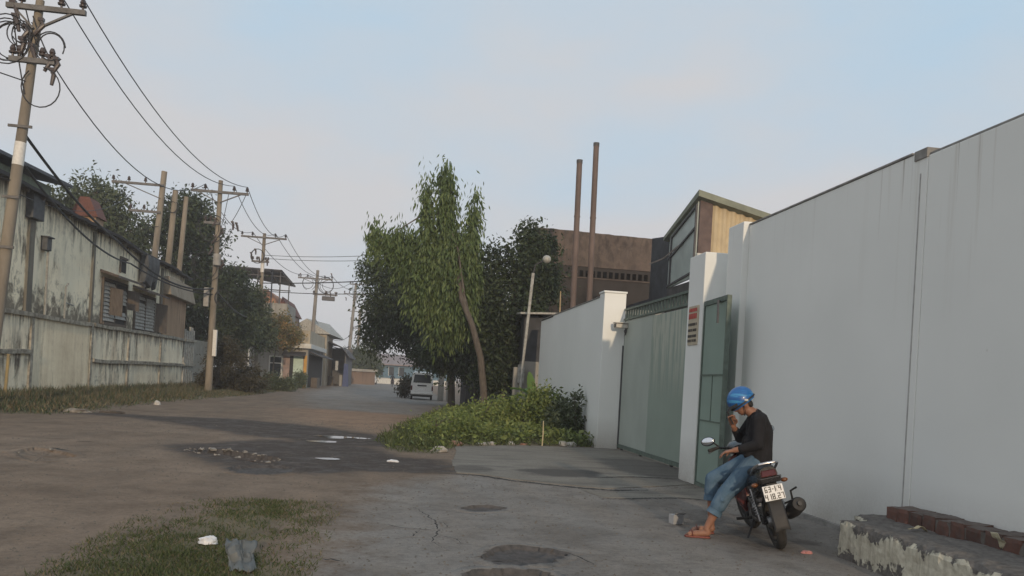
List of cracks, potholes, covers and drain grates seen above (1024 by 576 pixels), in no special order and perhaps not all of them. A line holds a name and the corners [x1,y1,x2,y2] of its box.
pothole [3,446,88,463]
pothole [452,504,515,514]
pothole [469,543,584,569]
crack [383,473,731,550]
crack [563,553,596,565]
pothole [447,566,566,576]
